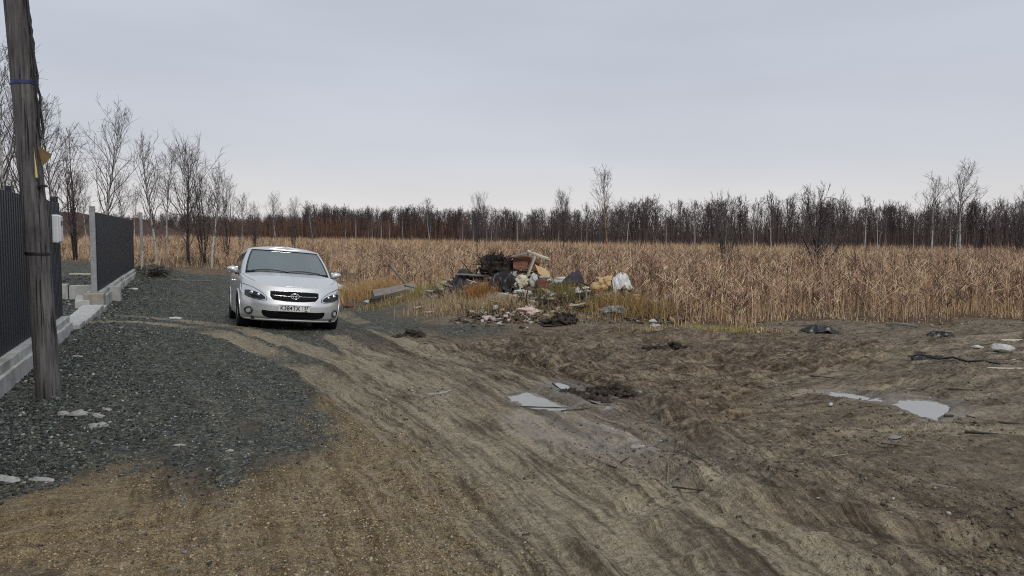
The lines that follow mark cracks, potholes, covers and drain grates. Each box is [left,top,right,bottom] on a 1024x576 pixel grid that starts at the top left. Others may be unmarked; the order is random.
pothole [504,384,591,411]
pothole [863,394,969,422]
